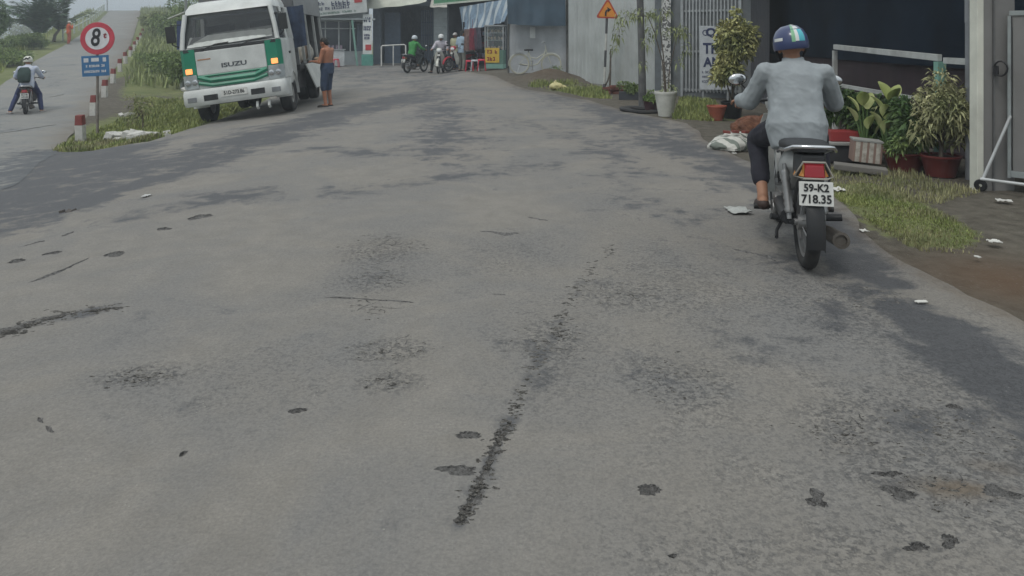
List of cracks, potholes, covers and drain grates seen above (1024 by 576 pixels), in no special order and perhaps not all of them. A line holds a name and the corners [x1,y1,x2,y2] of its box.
pothole [941,533,960,549]
crack [324,235,430,320]
pothole [805,488,829,508]
pothole [455,431,481,439]
crack [453,245,687,526]
pothole [878,485,919,502]
pothole [434,465,477,476]
pothole [637,483,662,496]
crack [25,232,88,283]
crack [0,303,130,338]
pothole [902,541,931,551]
